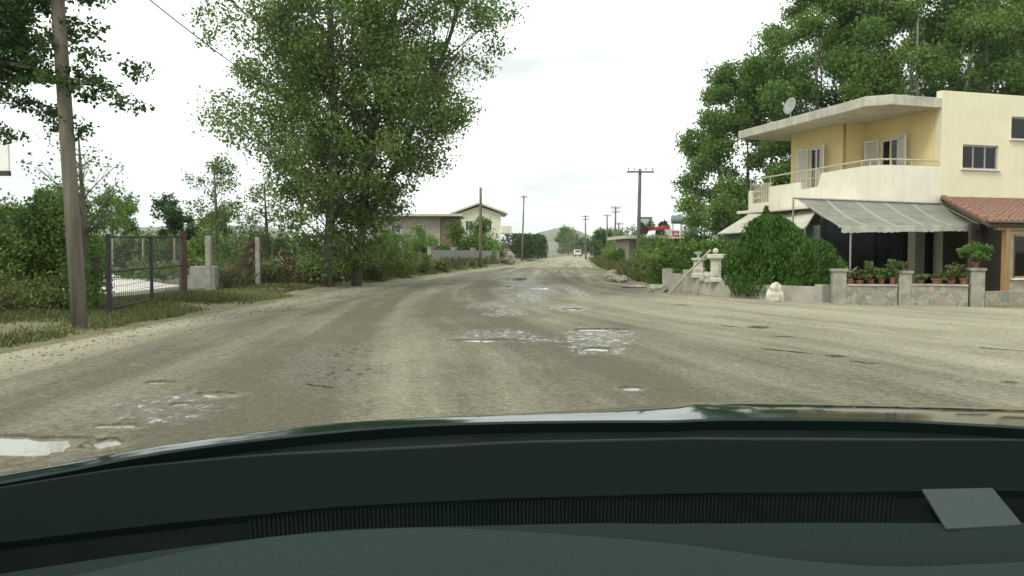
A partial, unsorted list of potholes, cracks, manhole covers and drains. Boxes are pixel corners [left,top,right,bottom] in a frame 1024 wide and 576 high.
pothole [85,421,150,431]
pothole [0,433,100,458]
pothole [189,390,250,400]
pothole [64,435,134,452]
